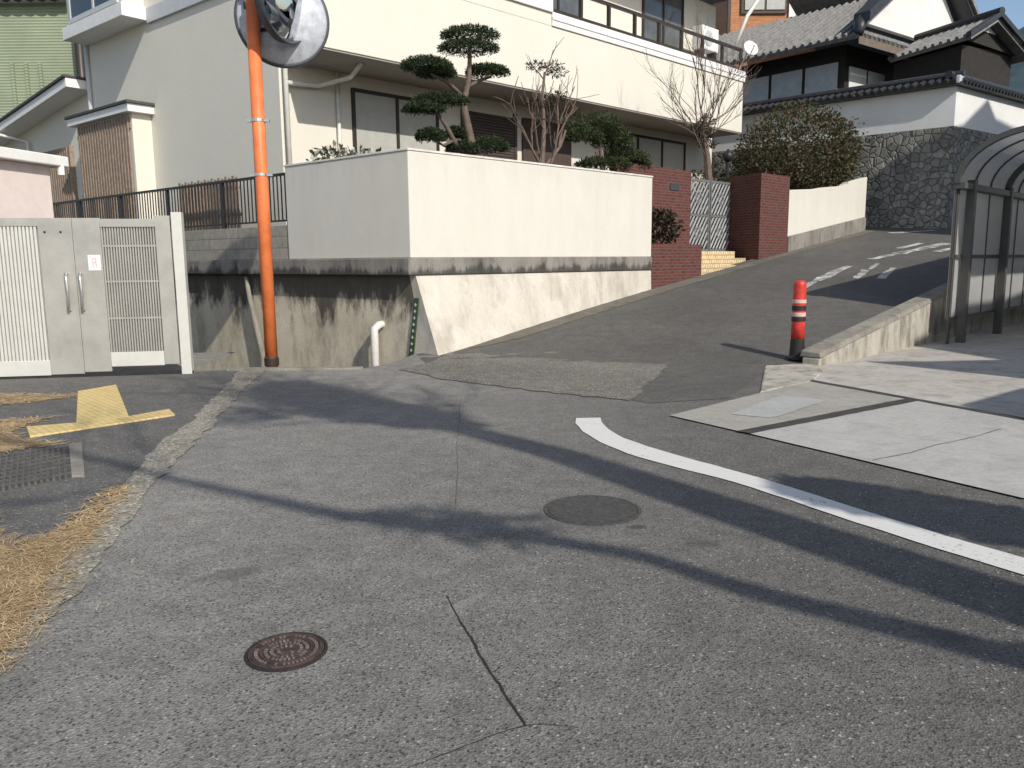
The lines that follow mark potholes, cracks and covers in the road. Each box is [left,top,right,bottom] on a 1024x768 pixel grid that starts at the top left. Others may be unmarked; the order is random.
drain grate [0,442,85,491]
manhole cover [544,495,641,526]
manhole cover [244,632,328,672]
crack [873,429,1000,460]
crack [407,595,578,768]
